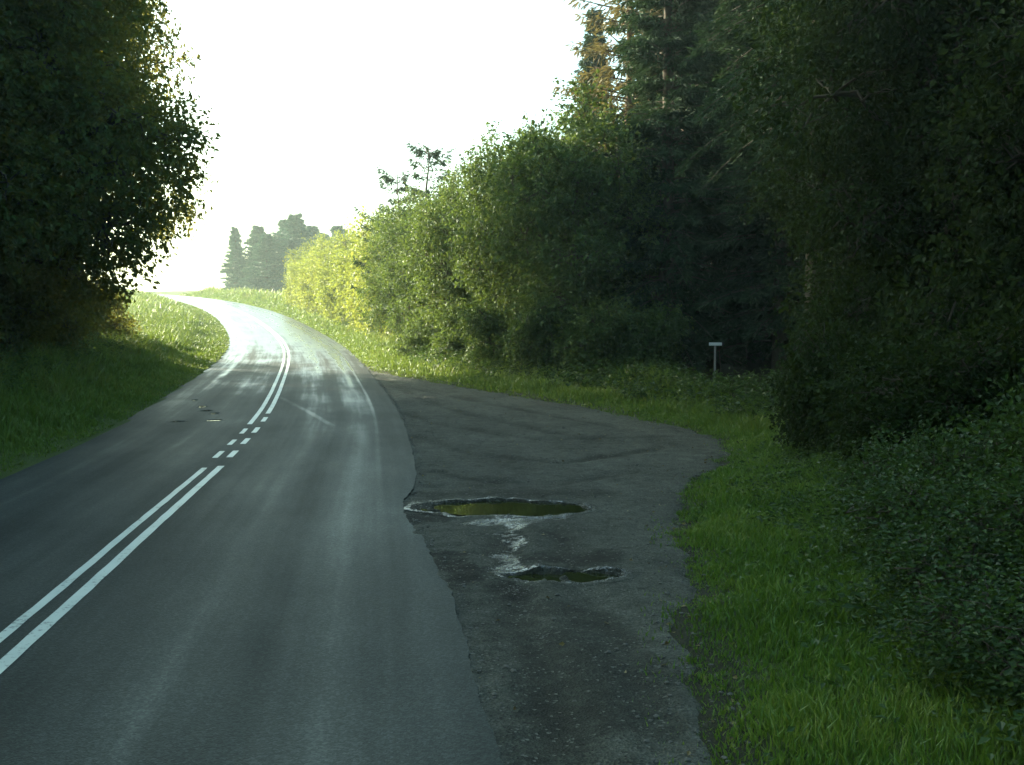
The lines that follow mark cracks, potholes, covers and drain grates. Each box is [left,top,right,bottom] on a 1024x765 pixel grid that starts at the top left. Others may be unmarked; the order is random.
pothole [403,496,602,518]
pothole [485,563,640,587]
